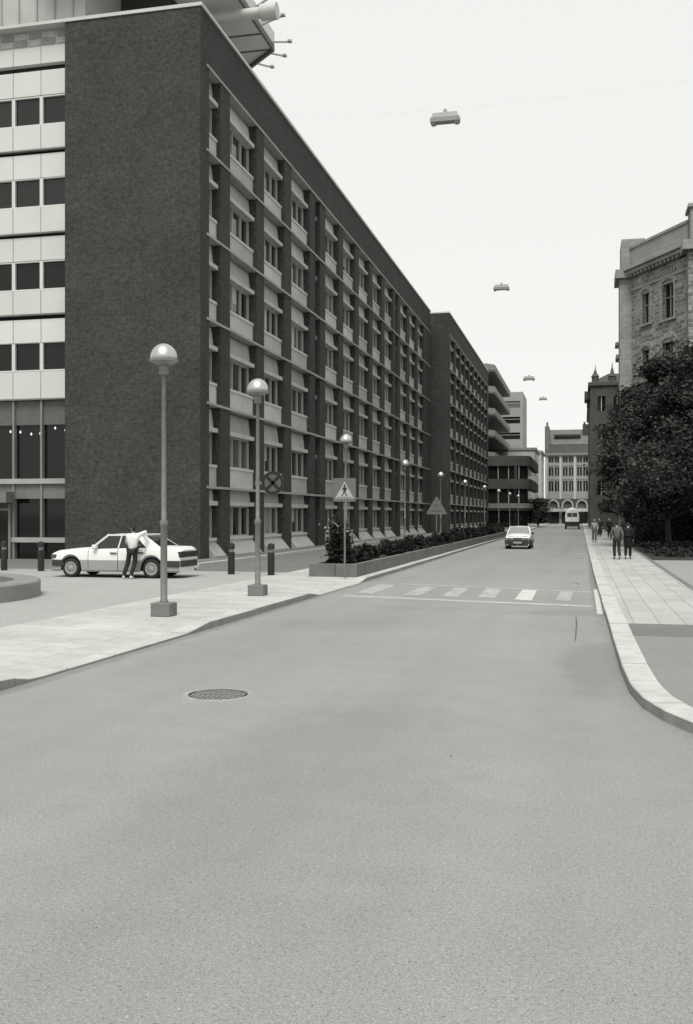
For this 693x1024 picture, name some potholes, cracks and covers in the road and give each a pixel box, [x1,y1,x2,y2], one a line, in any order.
manhole cover [182,688,254,701]
